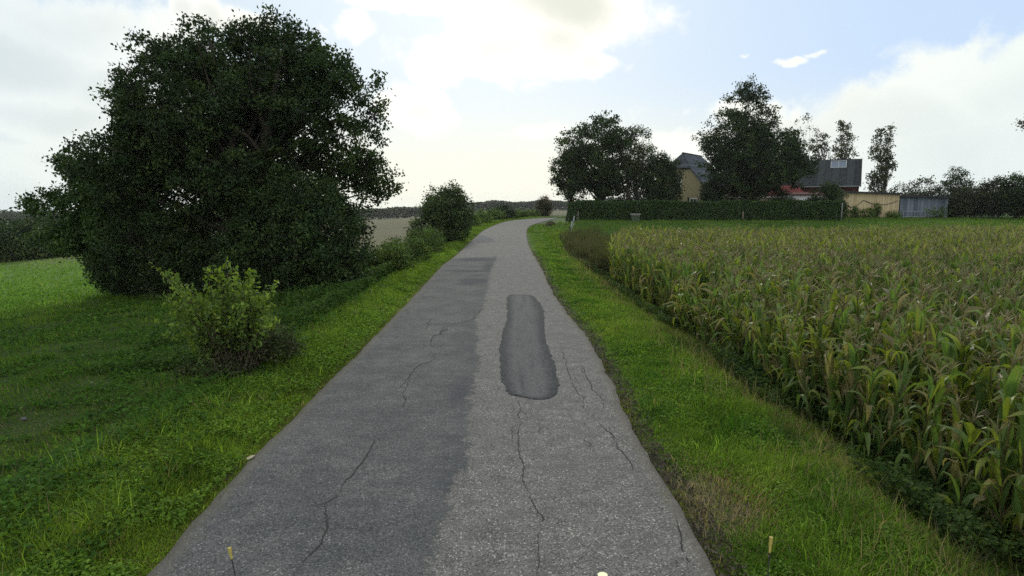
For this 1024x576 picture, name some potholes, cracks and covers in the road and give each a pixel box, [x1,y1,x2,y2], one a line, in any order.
crack [294,438,380,574]
crack [675,519,695,567]
crack [512,401,544,575]
crack [563,355,613,408]
crack [399,310,481,408]
